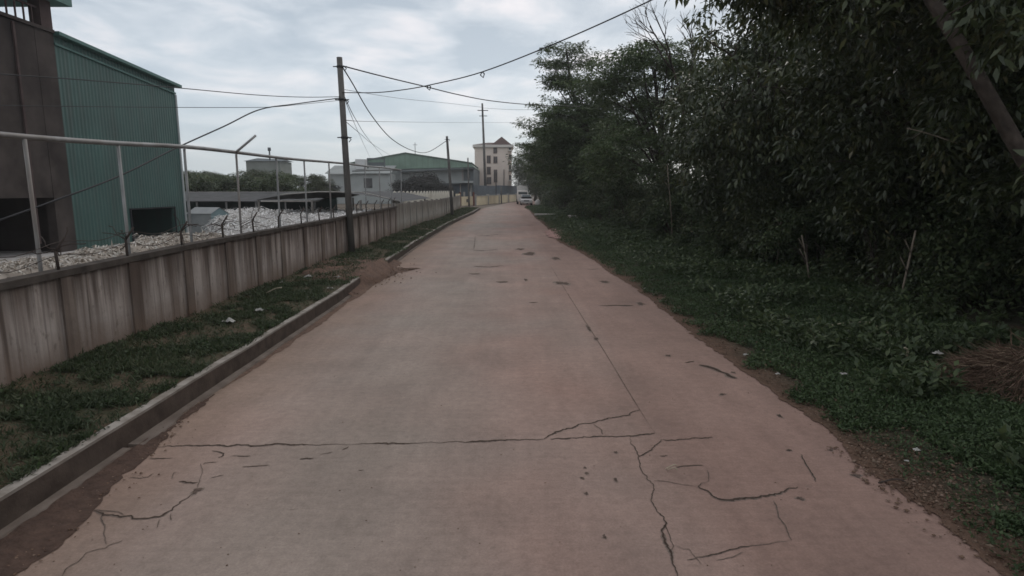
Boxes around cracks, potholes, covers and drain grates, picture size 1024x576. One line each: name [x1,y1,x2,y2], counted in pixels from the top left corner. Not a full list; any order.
crack [62,451,266,576]
crack [544,410,816,576]
